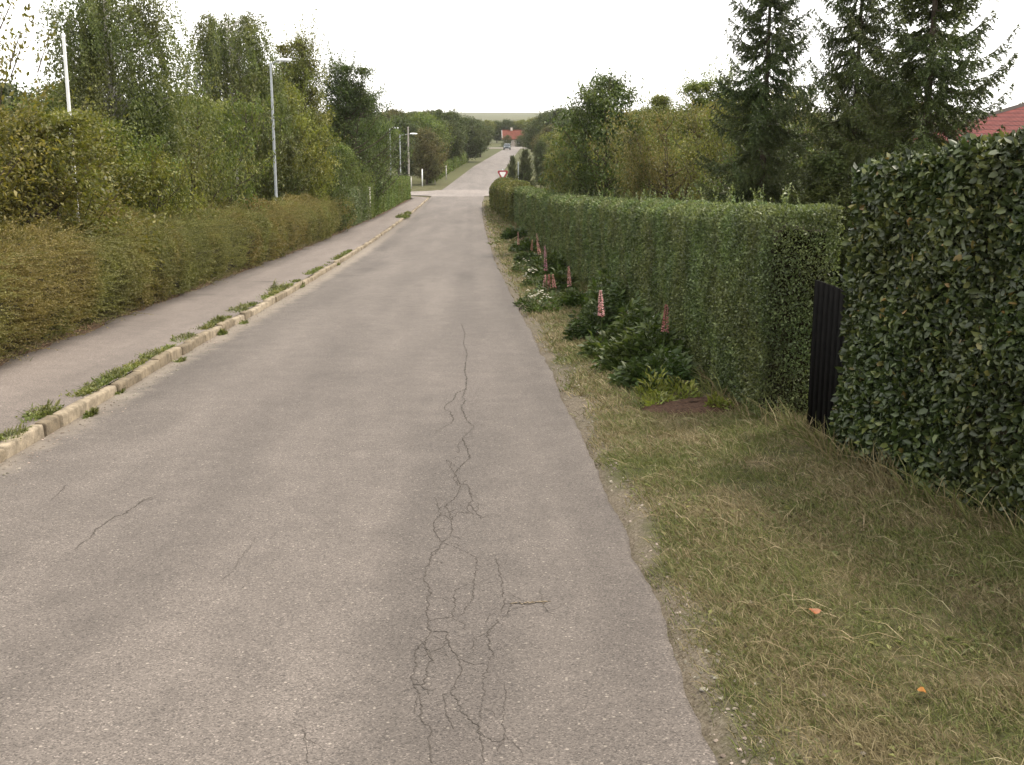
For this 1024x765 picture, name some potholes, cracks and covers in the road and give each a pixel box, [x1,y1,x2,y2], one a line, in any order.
crack [75,497,151,549]
crack [397,326,566,762]
